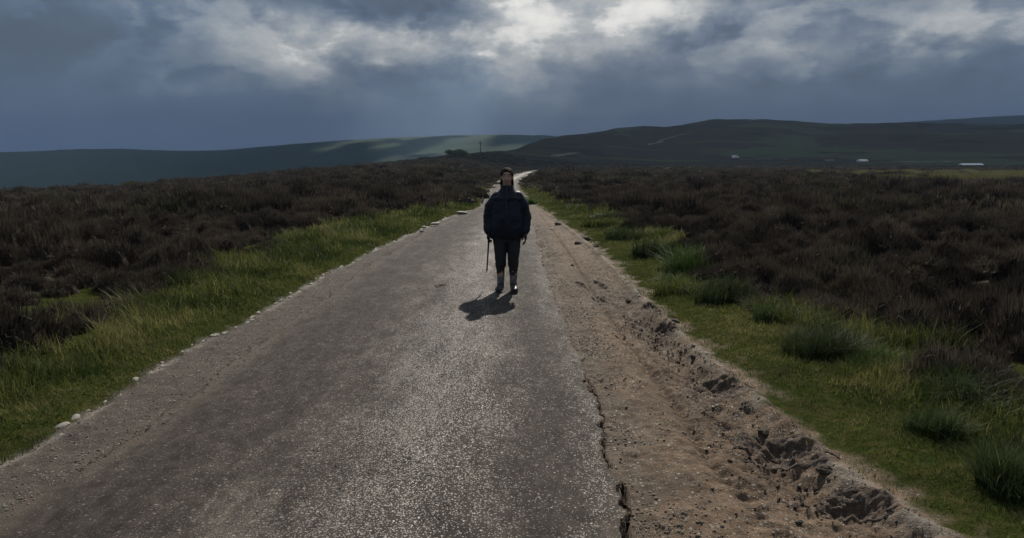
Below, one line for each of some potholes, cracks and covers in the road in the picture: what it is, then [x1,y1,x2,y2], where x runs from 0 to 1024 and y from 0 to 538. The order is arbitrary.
crack [582,379,632,538]
